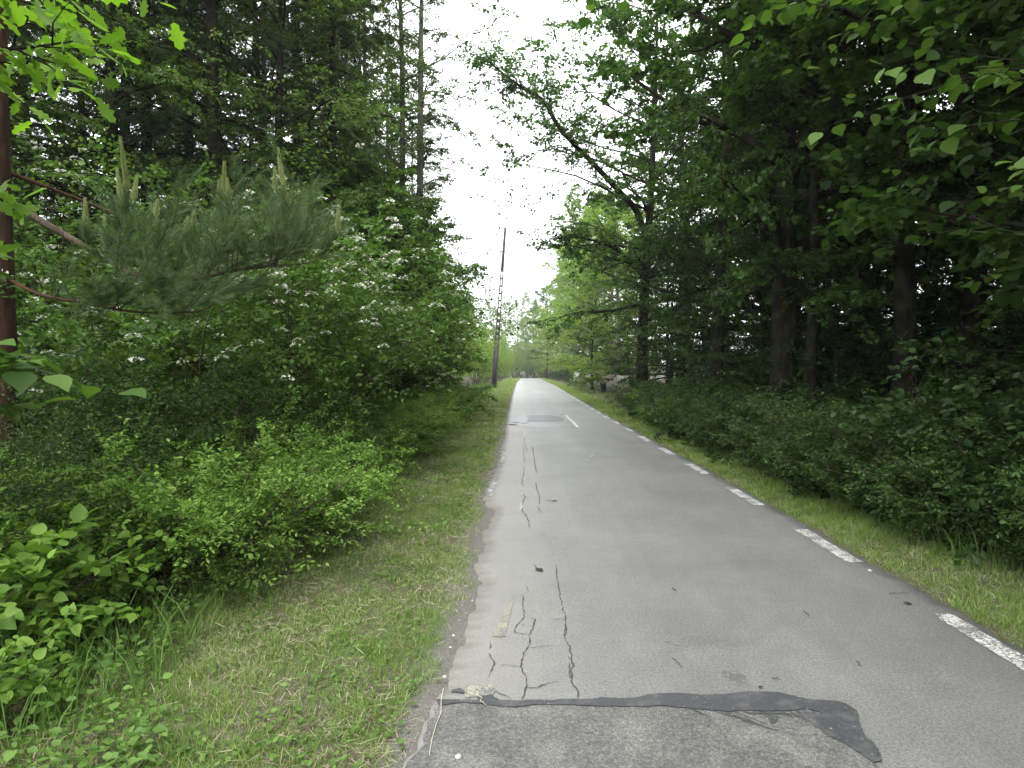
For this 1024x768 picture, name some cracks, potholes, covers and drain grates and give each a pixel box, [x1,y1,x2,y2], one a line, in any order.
crack [505,422,542,527]
crack [554,567,579,699]
crack [488,588,556,699]
